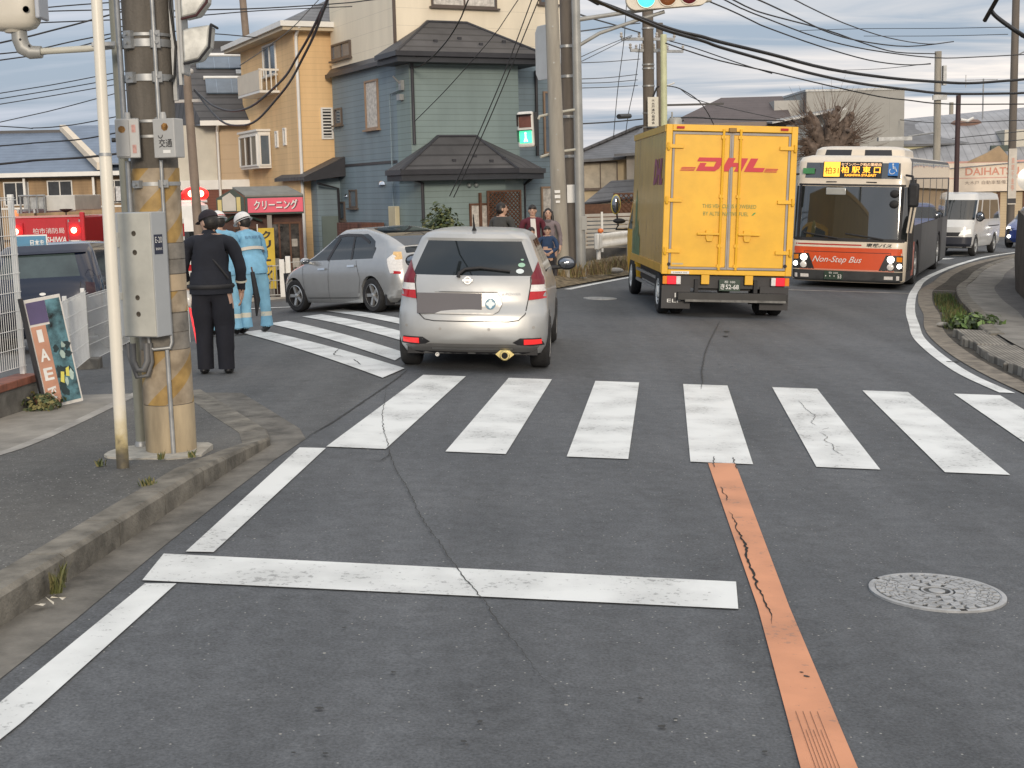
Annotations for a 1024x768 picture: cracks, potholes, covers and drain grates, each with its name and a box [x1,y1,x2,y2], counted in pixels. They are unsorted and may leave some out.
crack [376,390,567,704]
crack [721,487,772,623]
manhole cover [868,573,1007,613]
crack [701,323,719,388]
